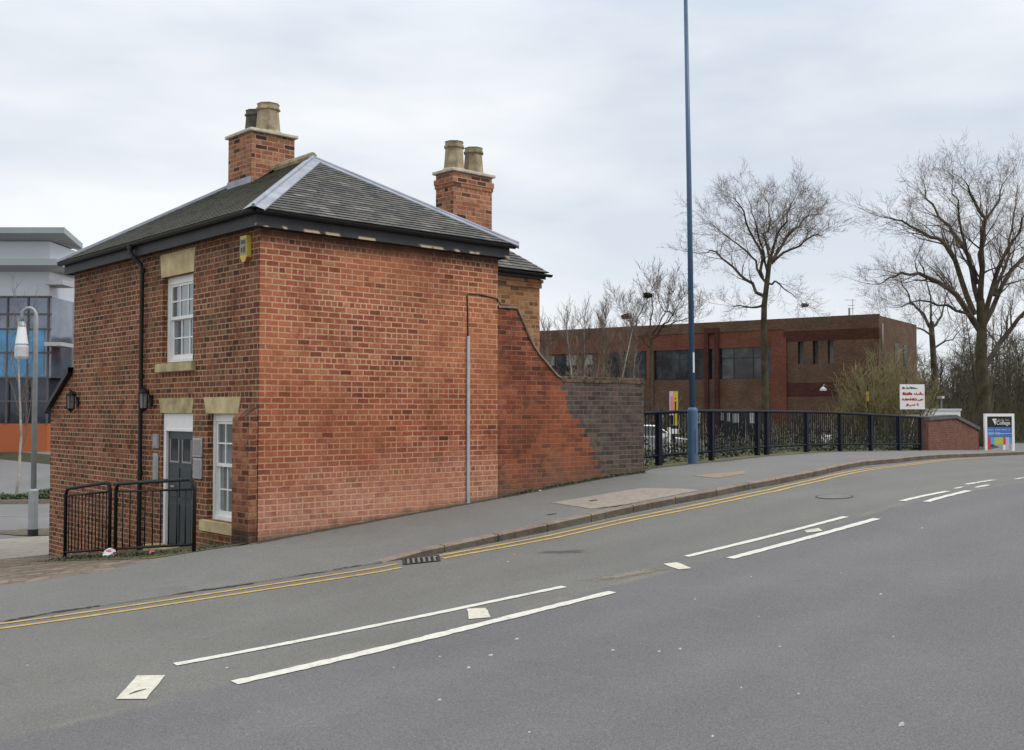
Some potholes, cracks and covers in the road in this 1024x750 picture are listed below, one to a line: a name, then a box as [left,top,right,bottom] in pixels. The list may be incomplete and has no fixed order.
drain grate [403,555,440,564]
